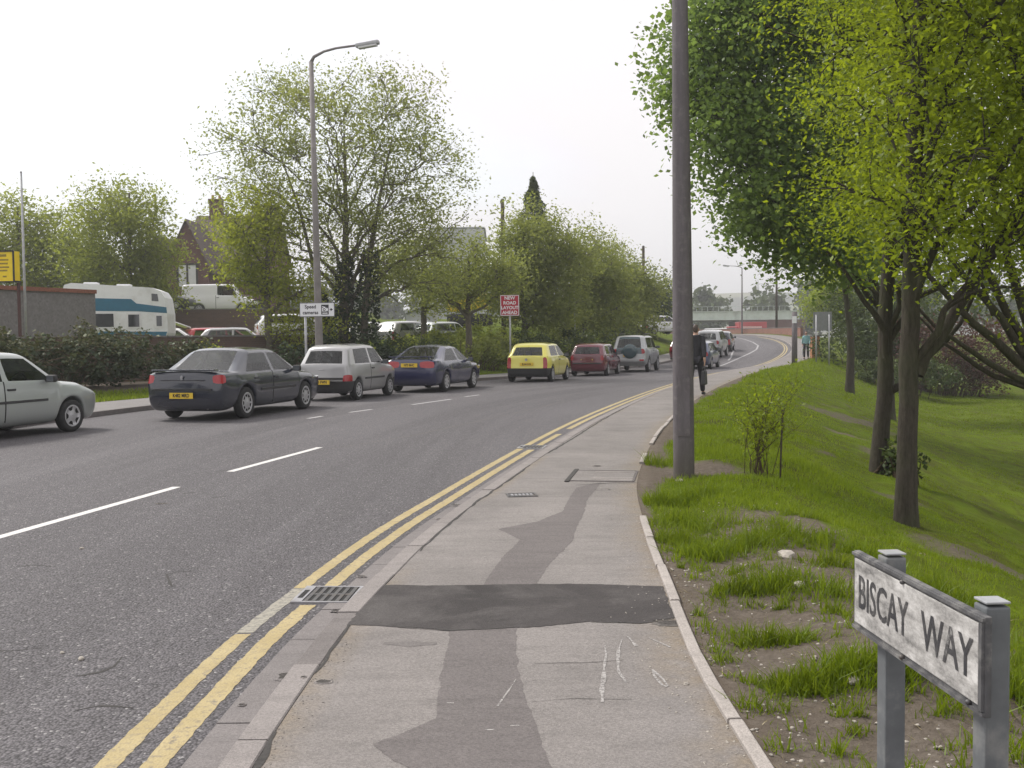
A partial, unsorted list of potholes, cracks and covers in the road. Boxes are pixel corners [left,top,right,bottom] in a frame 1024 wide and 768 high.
drain grate [290,586,363,604]
manhole cover [564,469,638,482]
crack [79,657,122,676]
